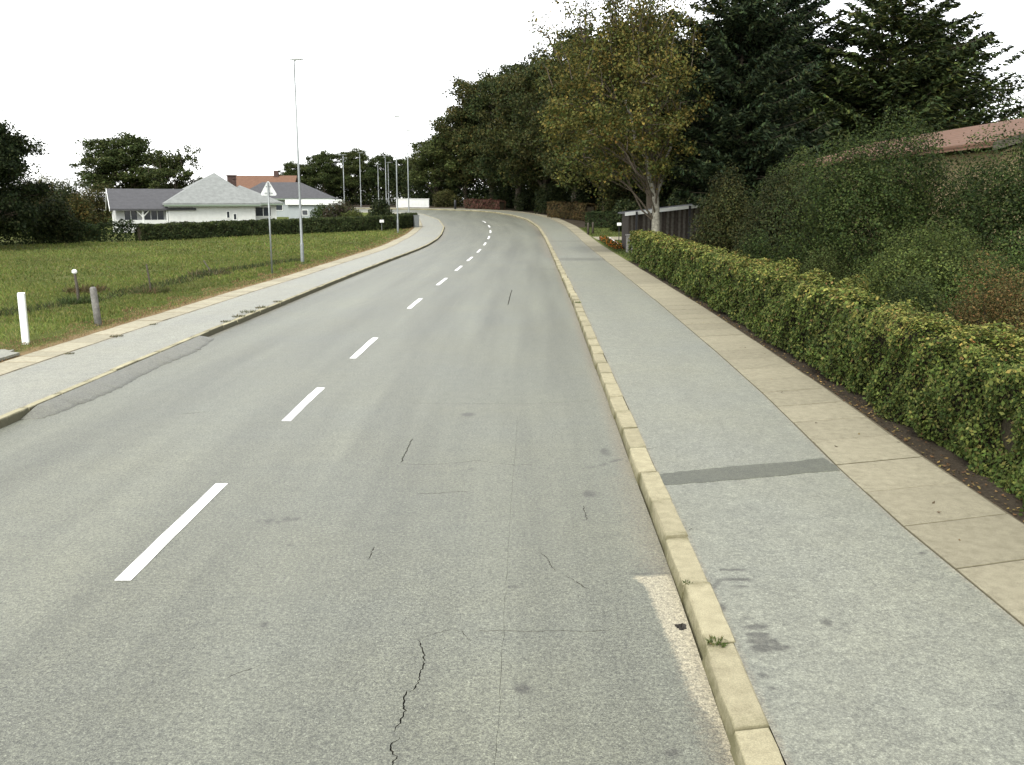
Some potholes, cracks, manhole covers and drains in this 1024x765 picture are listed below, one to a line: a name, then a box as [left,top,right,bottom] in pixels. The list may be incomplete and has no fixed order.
crack [390,426,608,765]
